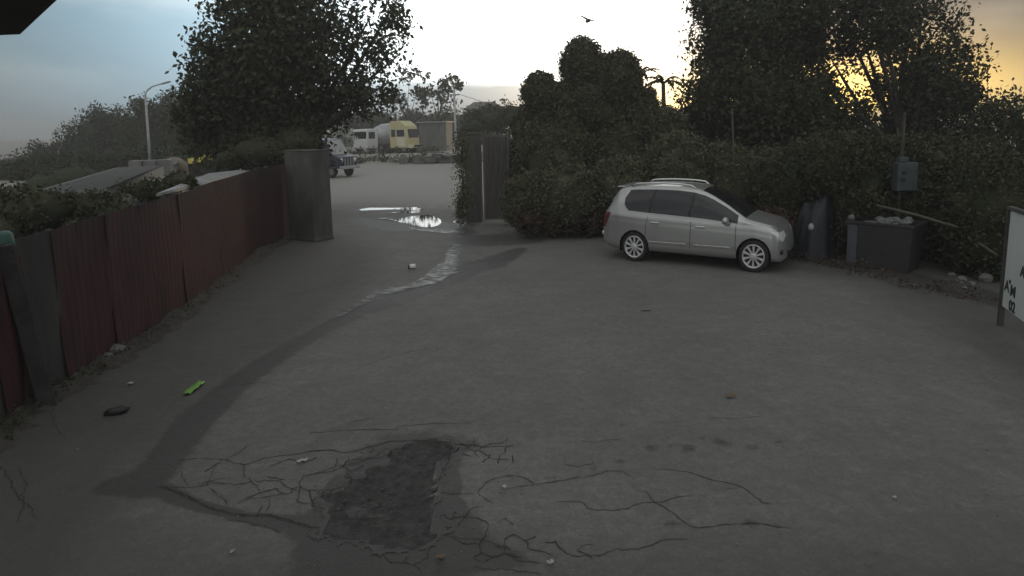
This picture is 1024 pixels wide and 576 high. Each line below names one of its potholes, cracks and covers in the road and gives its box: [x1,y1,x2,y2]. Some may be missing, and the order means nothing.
crack [0,466,37,522]
crack [159,418,786,574]
